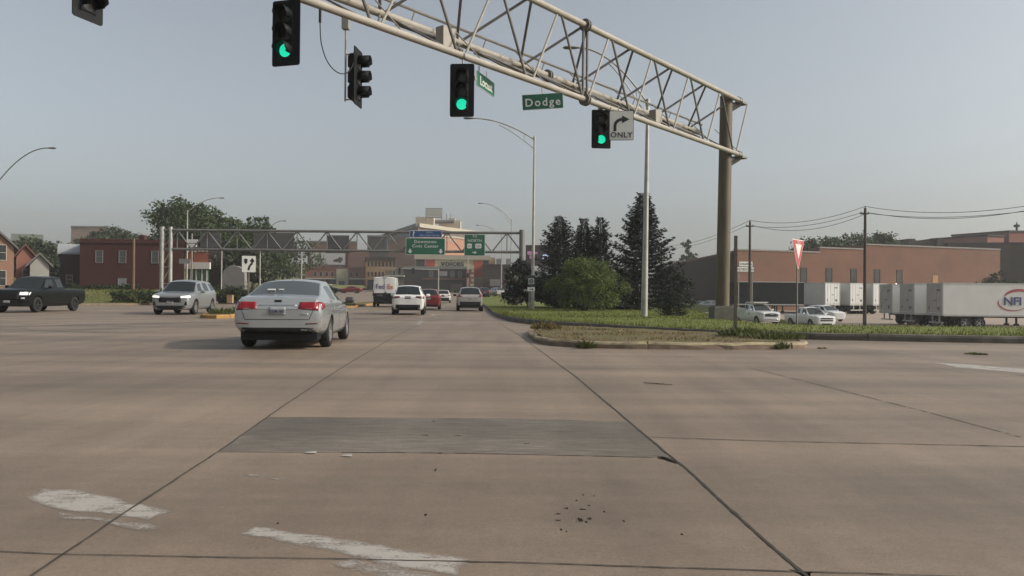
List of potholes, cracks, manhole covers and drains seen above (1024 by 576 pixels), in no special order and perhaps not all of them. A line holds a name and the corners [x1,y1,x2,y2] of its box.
pothole [554,494,625,532]
